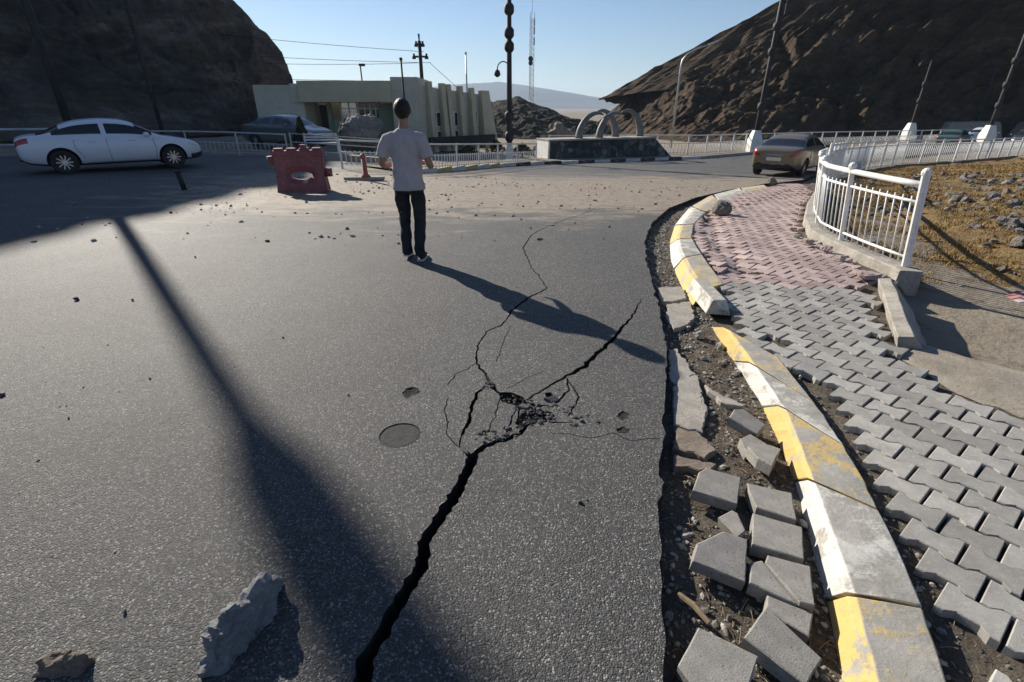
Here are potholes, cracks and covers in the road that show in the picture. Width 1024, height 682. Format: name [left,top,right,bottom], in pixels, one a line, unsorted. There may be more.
crack [353,205,660,682]
manhole cover [379,423,420,448]
pothole [402,387,421,399]
pothole [515,410,555,429]
pothole [500,392,561,406]
